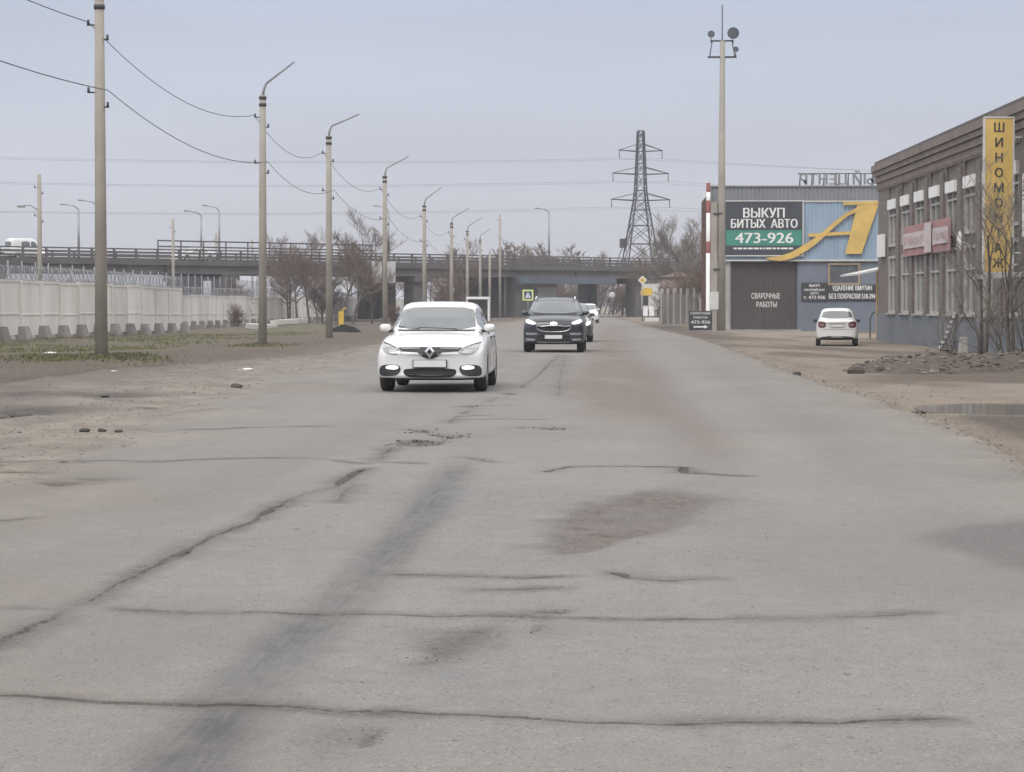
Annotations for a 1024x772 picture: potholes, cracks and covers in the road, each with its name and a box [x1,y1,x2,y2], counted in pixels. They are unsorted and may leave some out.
crack [0,447,918,647]
crack [520,354,566,395]
crack [0,695,939,726]
